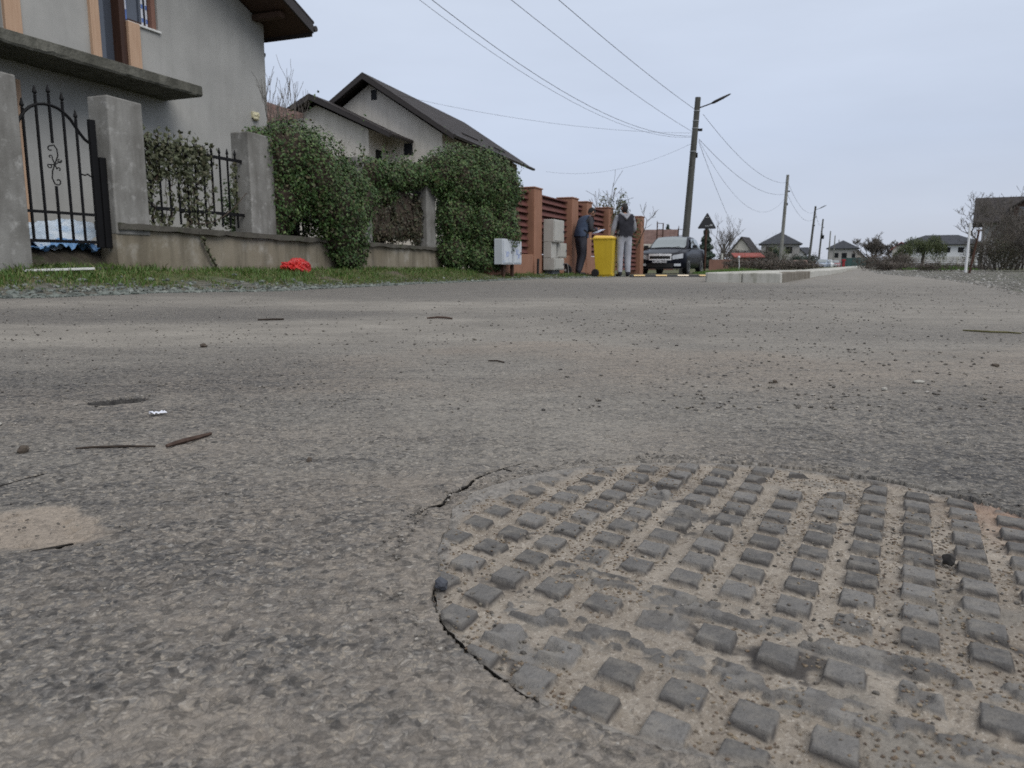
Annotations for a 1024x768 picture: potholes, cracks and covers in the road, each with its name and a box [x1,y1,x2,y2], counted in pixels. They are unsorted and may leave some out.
crack [417,464,520,514]
manhole cover [431,462,1024,768]
